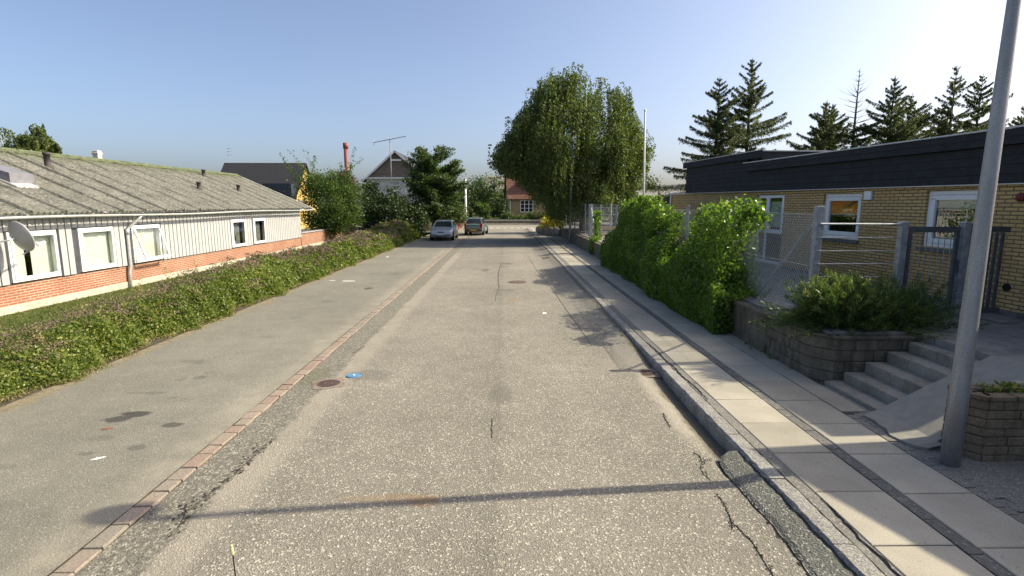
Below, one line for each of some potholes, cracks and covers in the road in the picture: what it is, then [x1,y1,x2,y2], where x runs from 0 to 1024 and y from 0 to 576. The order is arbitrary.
drain grate [639,368,662,378]
crack [693,452,774,576]
crack [167,439,273,538]
